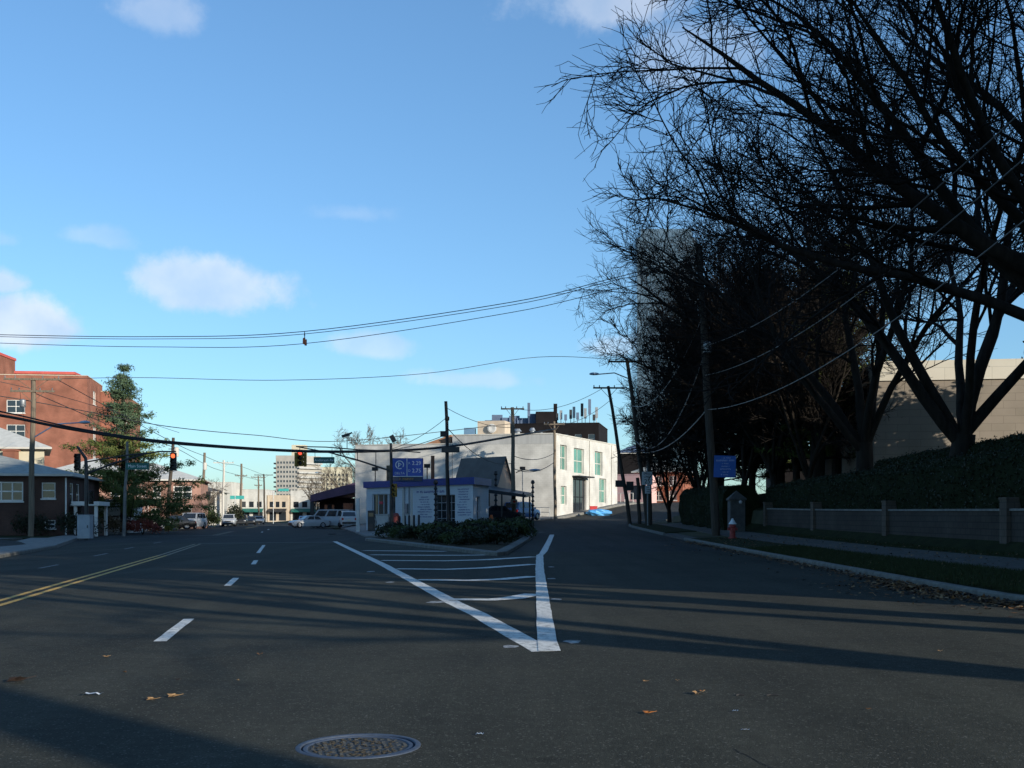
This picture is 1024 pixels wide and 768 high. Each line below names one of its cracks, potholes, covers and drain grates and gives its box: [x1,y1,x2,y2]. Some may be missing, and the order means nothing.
manhole cover [295,733,421,759]
